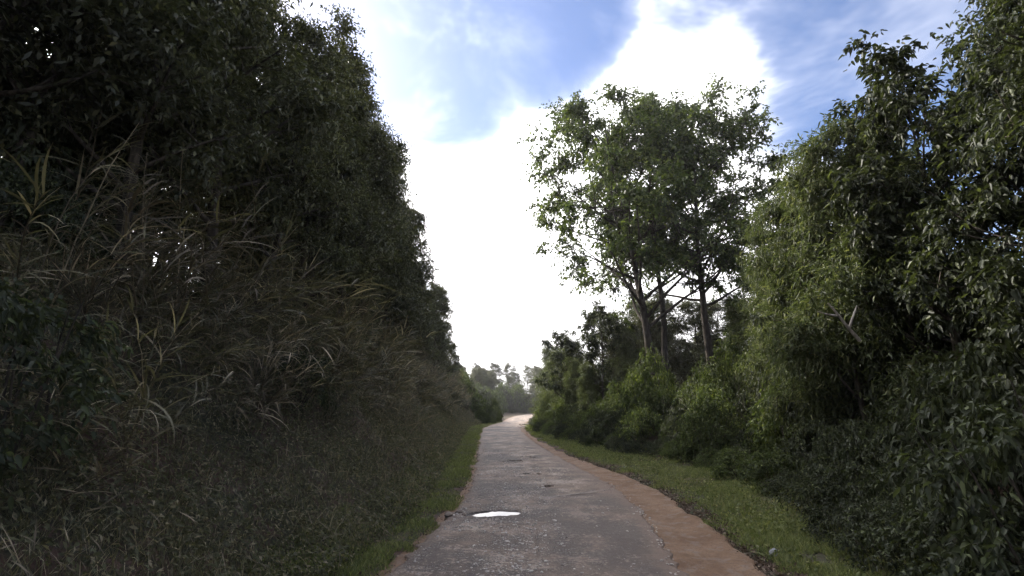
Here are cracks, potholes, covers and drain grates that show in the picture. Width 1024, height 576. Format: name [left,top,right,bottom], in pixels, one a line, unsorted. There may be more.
pothole [457,510,526,518]
